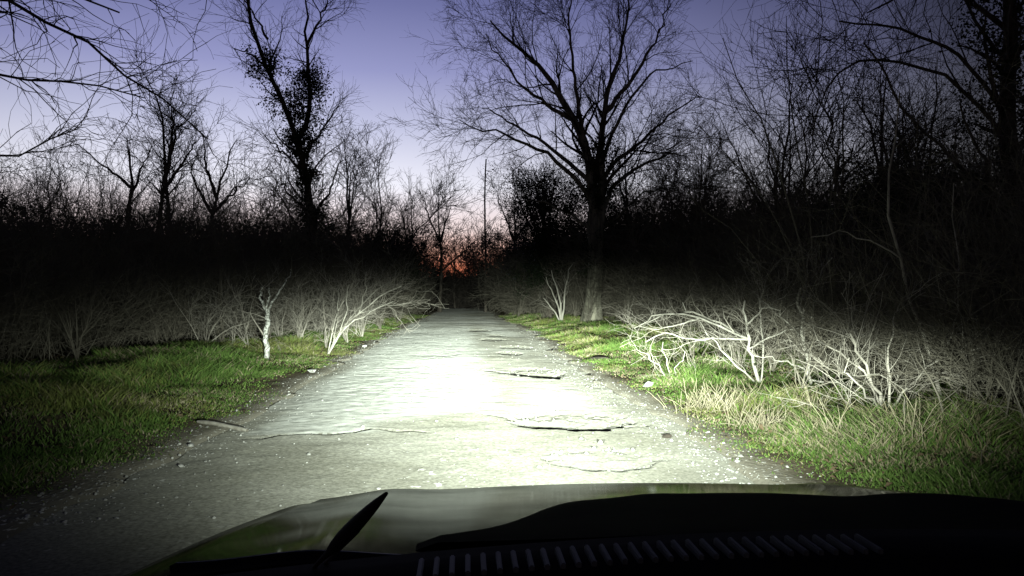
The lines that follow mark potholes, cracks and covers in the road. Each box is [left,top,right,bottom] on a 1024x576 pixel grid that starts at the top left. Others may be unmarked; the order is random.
pothole [540,448,669,472]
pothole [507,412,638,432]
crack [245,428,421,439]
pothole [506,367,568,380]
